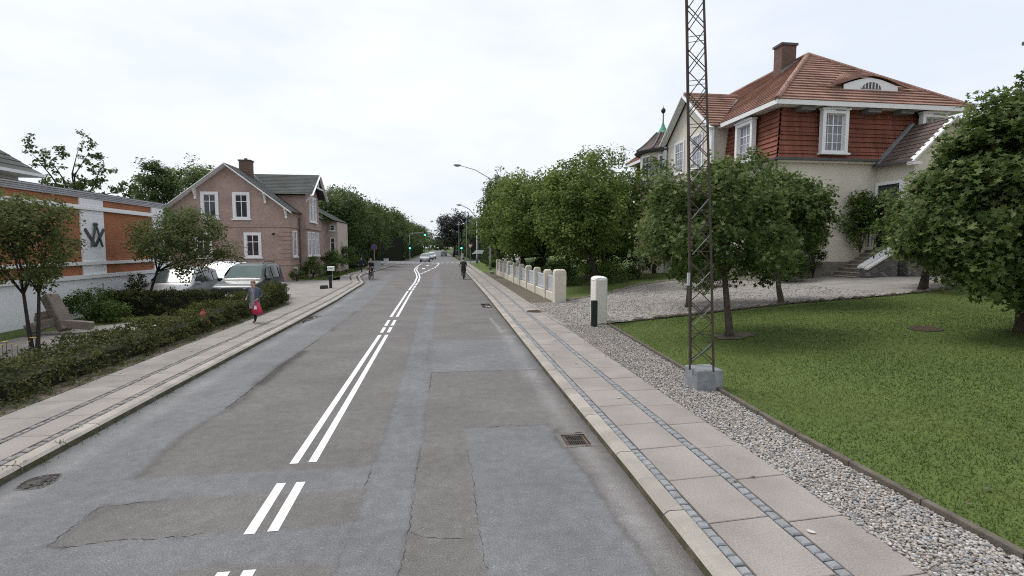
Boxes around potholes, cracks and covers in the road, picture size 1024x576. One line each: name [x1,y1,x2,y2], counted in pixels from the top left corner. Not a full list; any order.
crack [398,450,488,572]
drain grate [556,432,597,448]
